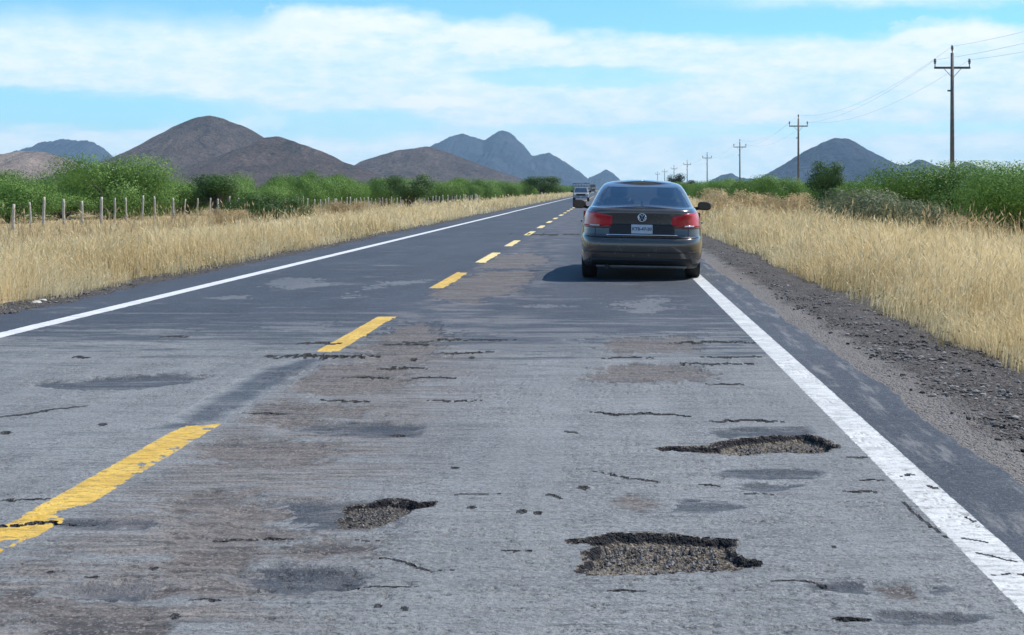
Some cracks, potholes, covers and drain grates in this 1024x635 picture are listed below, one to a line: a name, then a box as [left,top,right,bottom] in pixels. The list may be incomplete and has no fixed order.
crack [354,539,455,590]
pothole [332,498,438,530]
crack [564,411,692,434]
crack [0,405,89,417]
crack [592,589,647,608]
crack [601,341,763,366]
crack [593,471,661,483]
pothole [564,532,763,576]
crack [341,338,517,380]
crack [770,579,821,587]
pothole [654,434,842,456]
